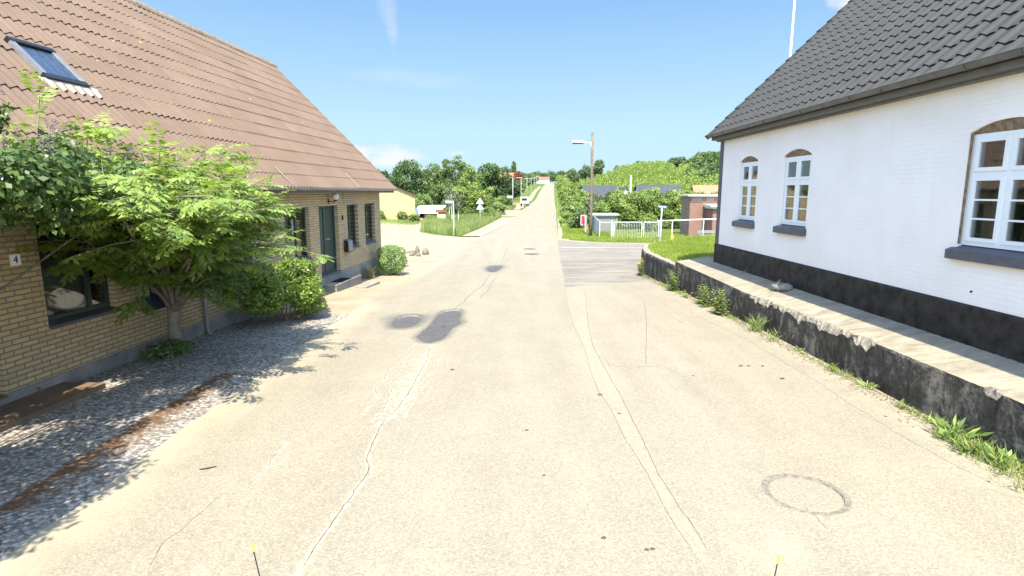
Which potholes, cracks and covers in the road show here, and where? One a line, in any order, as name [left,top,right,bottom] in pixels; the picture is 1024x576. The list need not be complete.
manhole cover [761,474,852,517]
crack [300,347,439,572]
crack [151,446,286,564]
